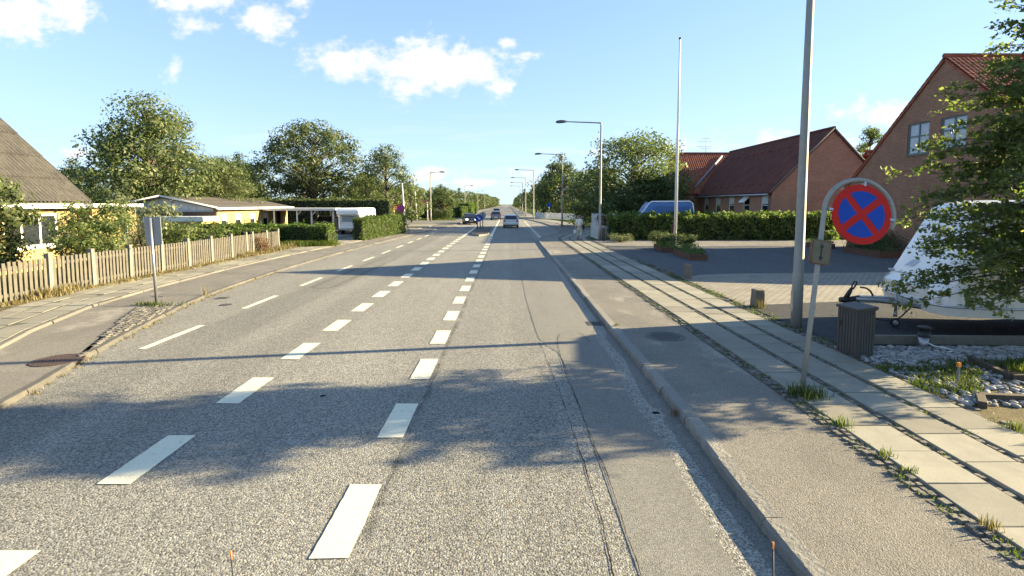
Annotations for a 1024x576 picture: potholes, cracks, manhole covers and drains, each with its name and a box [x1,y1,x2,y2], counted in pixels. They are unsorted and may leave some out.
manhole cover [645,332,685,341]
crack [520,266,641,576]
manhole cover [27,354,86,367]
